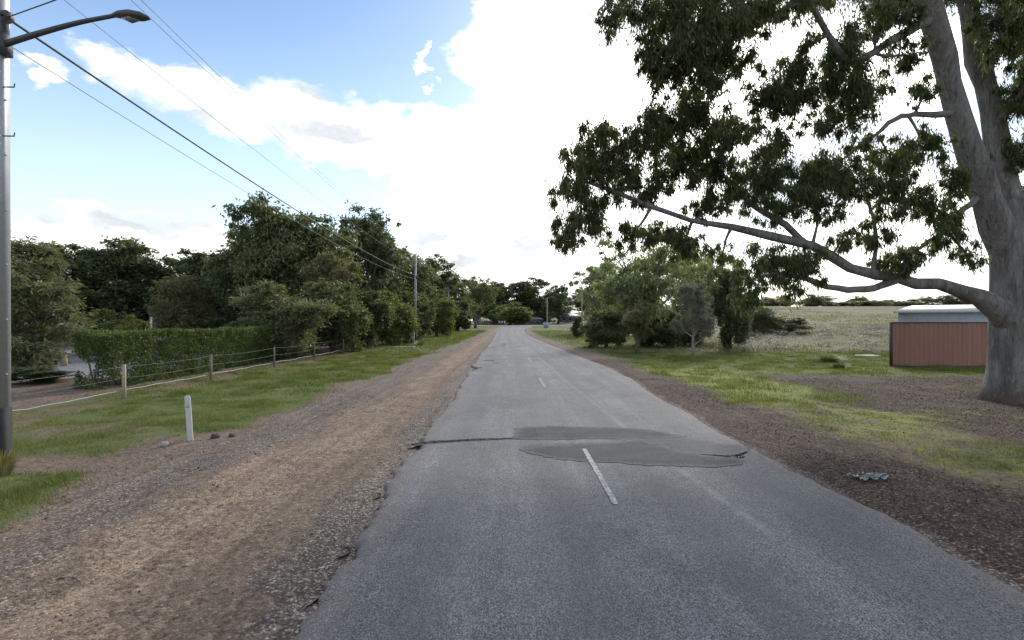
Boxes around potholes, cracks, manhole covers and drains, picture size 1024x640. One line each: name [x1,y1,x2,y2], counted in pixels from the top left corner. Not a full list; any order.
crack [699,449,751,458]
